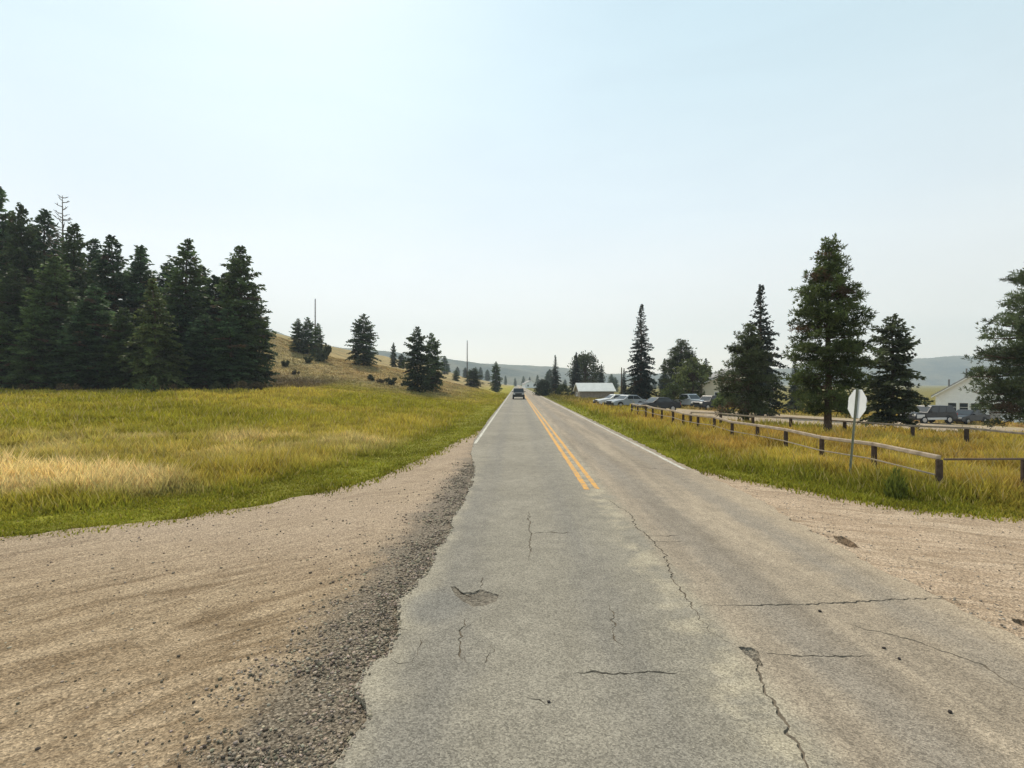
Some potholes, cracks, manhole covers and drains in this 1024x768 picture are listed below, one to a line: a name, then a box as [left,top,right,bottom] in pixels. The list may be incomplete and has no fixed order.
crack [717,598,965,606]
crack [527,512,567,561]
crack [458,619,495,665]
pothole [451,586,499,607]
crack [850,624,1024,690]
crack [601,495,875,768]
pothole [833,536,859,548]
